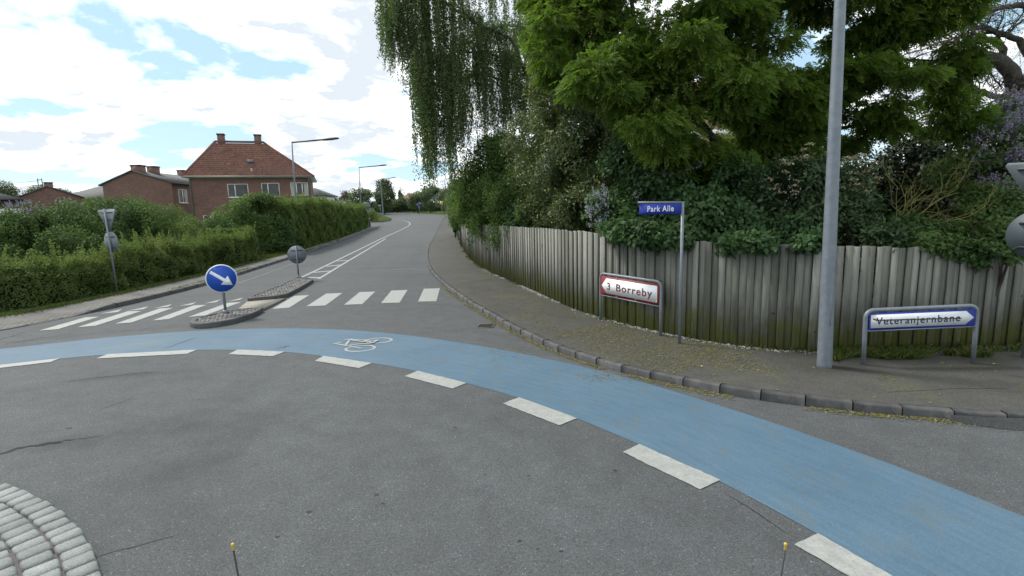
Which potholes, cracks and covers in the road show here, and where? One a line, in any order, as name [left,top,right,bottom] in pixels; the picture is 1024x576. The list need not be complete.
crack [0,435,102,454]
